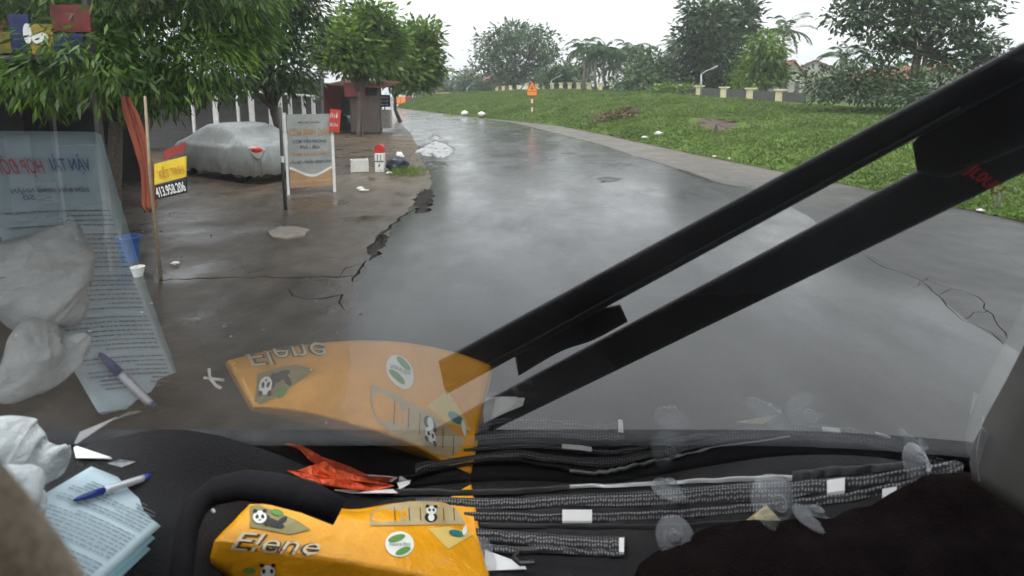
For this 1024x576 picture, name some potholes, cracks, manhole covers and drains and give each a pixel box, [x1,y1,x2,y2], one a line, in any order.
crack [376,210,413,241]
crack [155,257,366,310]
crack [868,257,1007,345]
